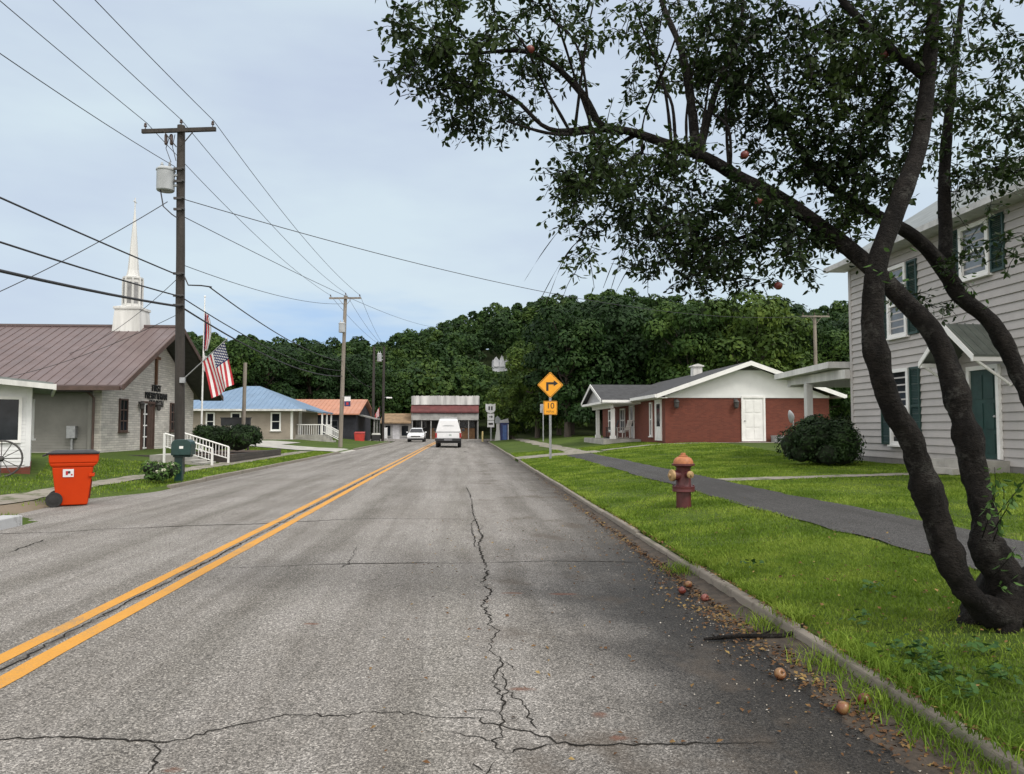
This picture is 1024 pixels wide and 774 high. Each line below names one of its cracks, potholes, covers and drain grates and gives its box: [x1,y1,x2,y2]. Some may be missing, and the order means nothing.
crack [0,487,771,774]
